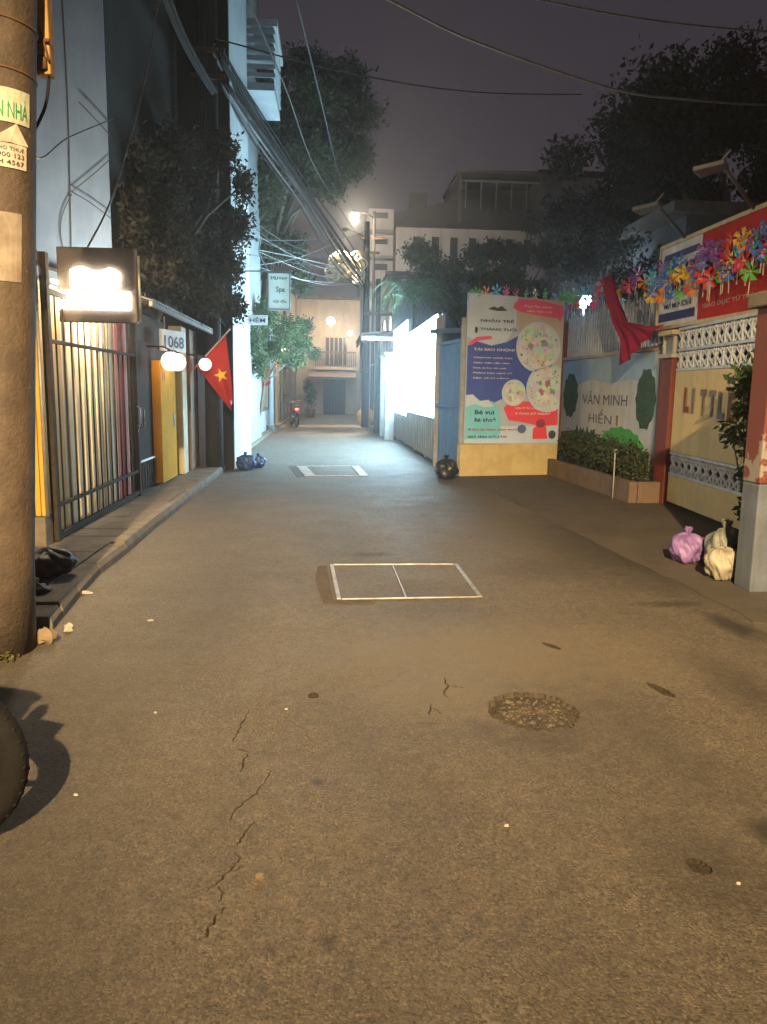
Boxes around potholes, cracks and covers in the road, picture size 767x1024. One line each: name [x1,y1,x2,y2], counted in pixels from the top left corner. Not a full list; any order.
crack [195,711,271,942]
crack [419,678,464,724]
manhole cover [315,563,483,604]
pothole [684,857,713,876]
manhole cover [289,466,368,477]
pothole [646,682,677,698]
